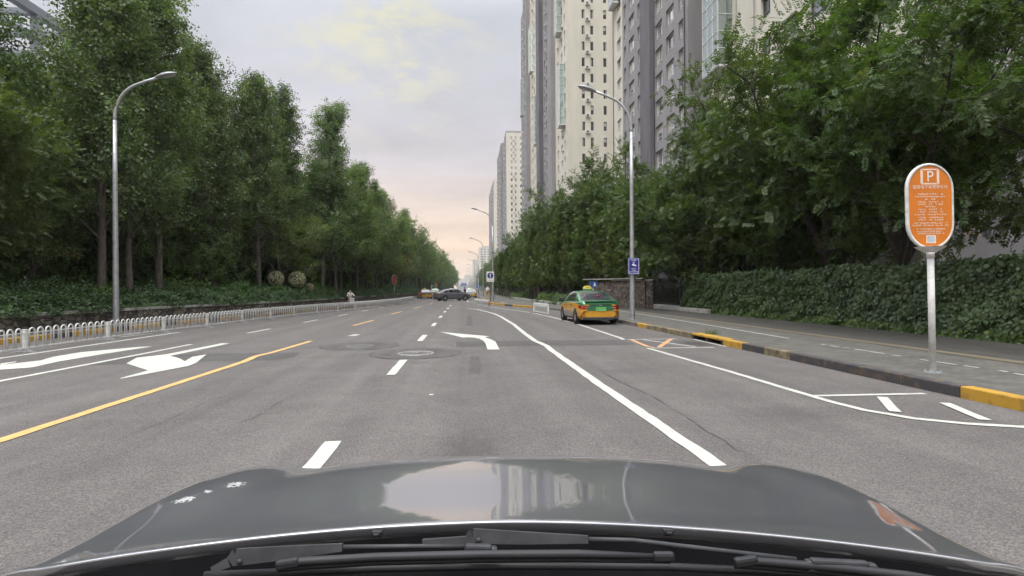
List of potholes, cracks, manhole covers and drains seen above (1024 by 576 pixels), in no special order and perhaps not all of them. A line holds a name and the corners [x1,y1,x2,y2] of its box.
manhole cover [369,348,461,359]
crack [593,365,752,455]
